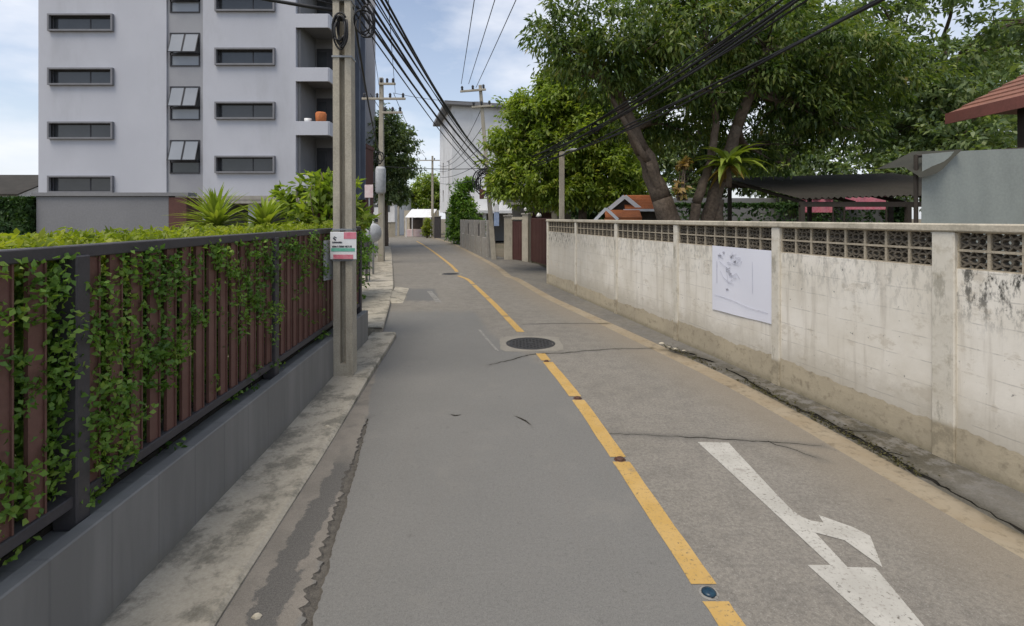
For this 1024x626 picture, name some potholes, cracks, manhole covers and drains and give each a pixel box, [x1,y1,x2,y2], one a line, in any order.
crack [618,433,818,457]
manhole cover [499,336,563,352]
crack [490,348,644,365]
